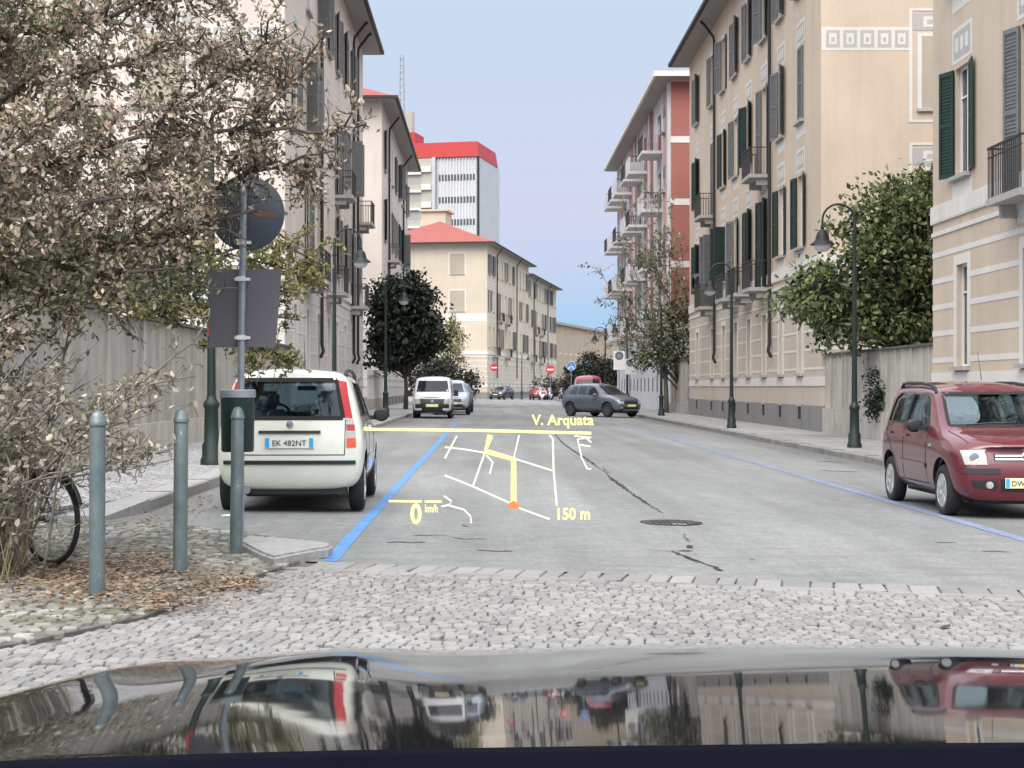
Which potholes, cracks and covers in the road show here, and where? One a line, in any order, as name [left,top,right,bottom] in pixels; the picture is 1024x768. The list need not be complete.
crack [650,533,724,571]
crack [554,434,663,513]
